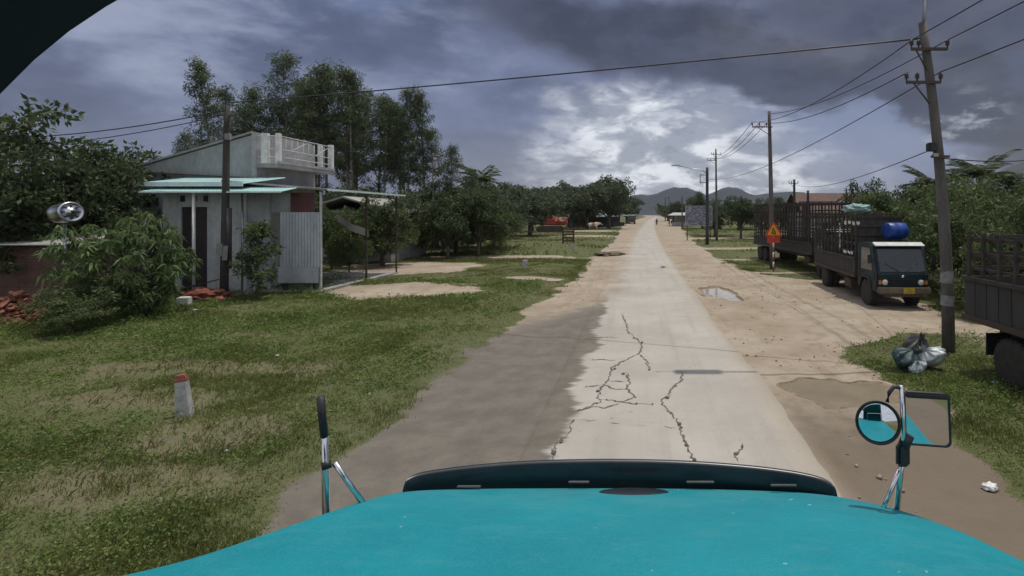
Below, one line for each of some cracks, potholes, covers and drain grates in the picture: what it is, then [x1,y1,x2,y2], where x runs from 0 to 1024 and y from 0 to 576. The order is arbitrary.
crack [551,316,696,461]
pothole [694,285,745,303]
